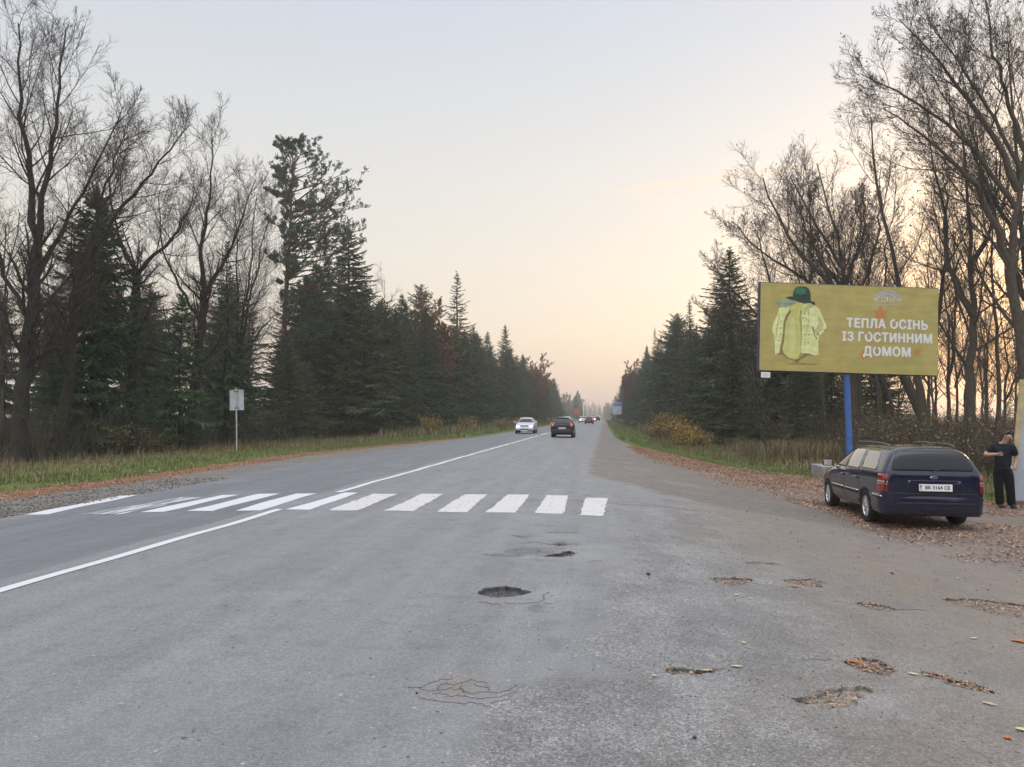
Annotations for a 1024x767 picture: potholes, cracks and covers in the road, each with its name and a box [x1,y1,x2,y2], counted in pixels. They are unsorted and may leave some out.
crack [409,678,517,706]
pothole [475,585,534,598]
pothole [708,576,756,586]
pothole [663,666,725,676]
pothole [782,578,825,588]
pothole [855,601,898,611]
pothole [787,685,877,709]
pothole [841,655,897,676]
pothole [937,597,1024,619]
